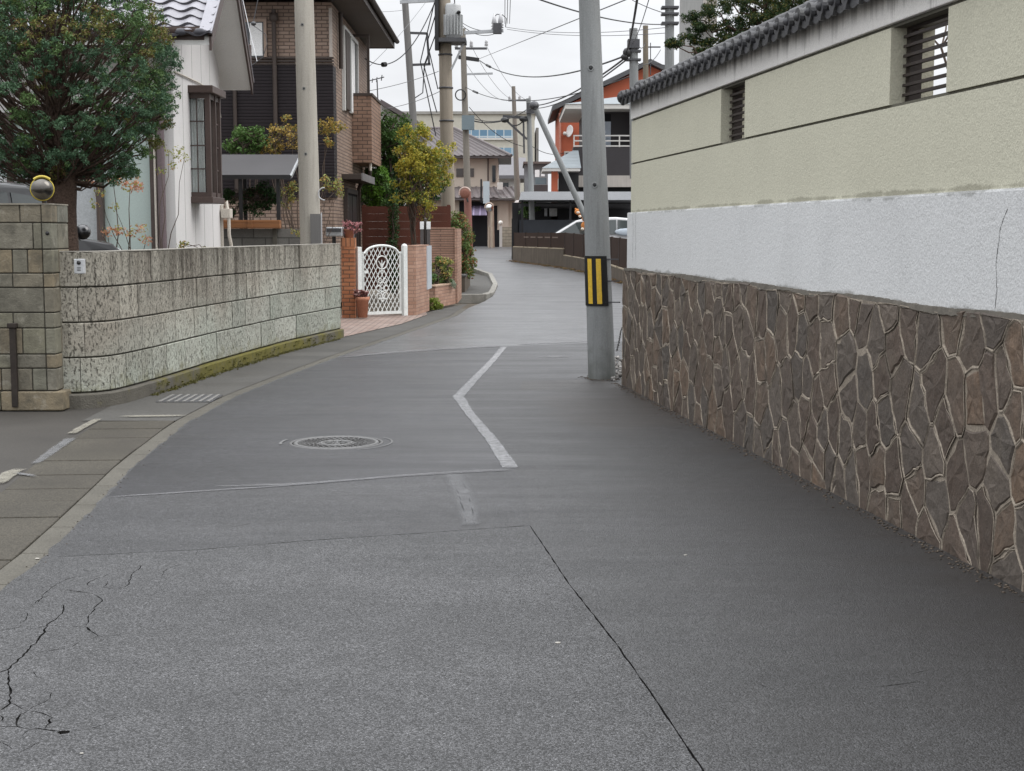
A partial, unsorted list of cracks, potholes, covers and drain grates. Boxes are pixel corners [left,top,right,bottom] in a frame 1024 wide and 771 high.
crack [0,565,177,752]
drain grate [156,394,222,404]
manhole cover [279,435,393,450]
